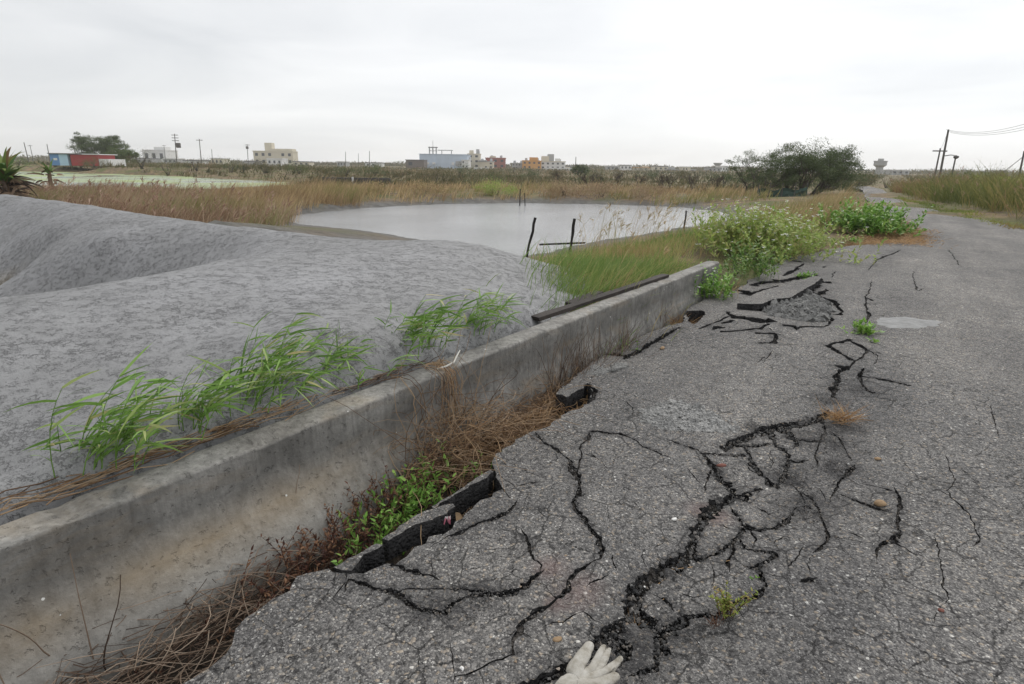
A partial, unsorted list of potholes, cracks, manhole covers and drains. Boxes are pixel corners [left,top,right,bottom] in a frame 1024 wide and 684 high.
crack [934,454,981,623]
crack [333,260,911,684]
